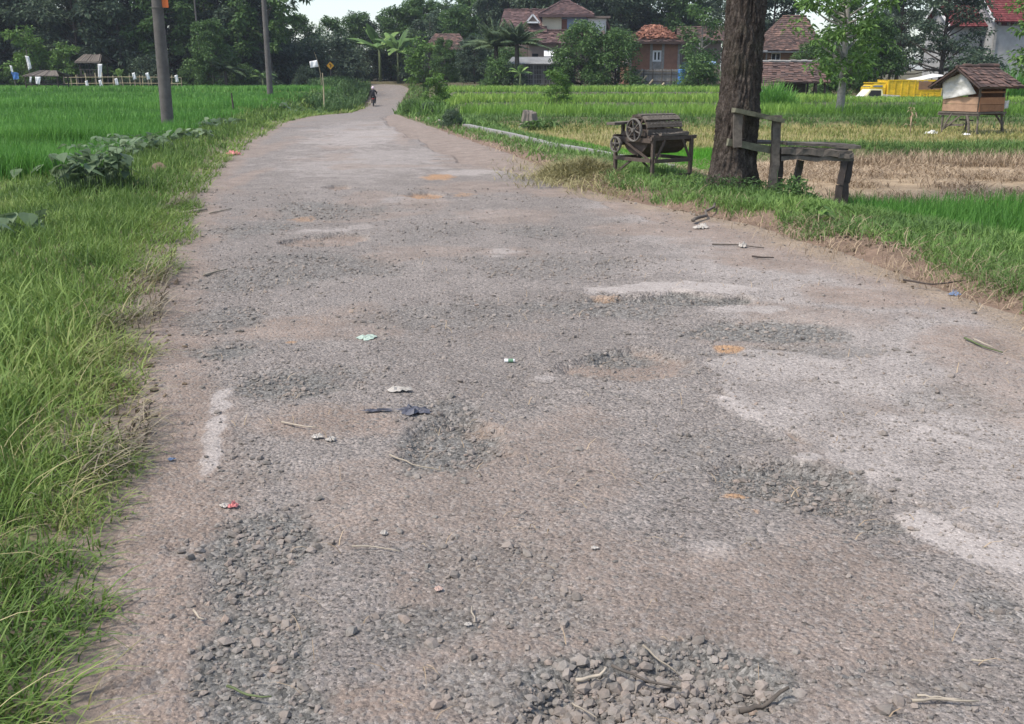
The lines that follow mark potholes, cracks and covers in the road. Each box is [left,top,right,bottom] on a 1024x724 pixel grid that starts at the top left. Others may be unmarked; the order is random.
pothole [397,412,517,474]
pothole [553,347,696,382]
pothole [695,457,883,519]
pothole [500,647,781,724]
pothole [577,289,754,307]
